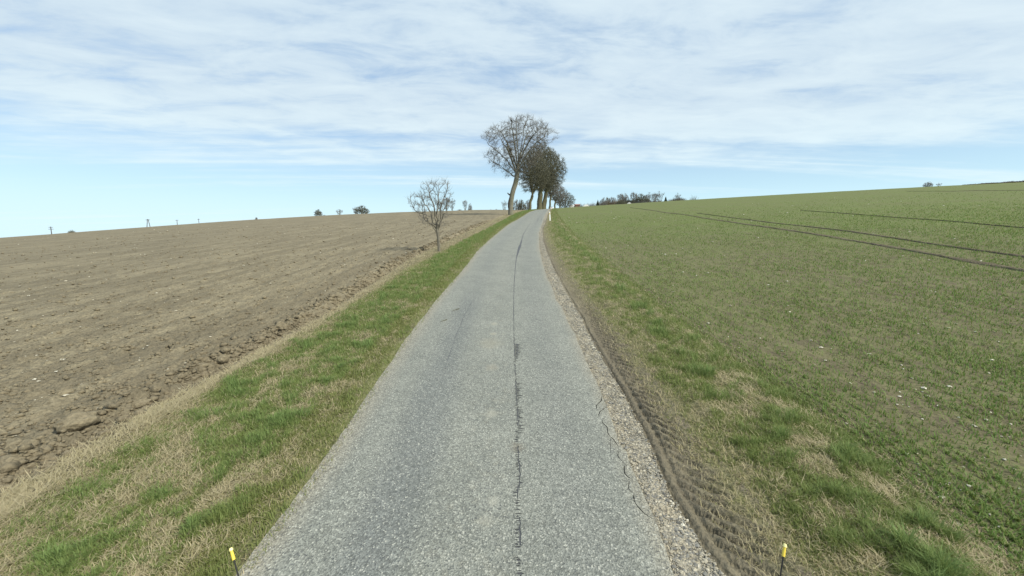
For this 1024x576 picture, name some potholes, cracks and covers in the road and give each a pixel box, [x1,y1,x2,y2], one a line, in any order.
crack [596,398,650,517]
